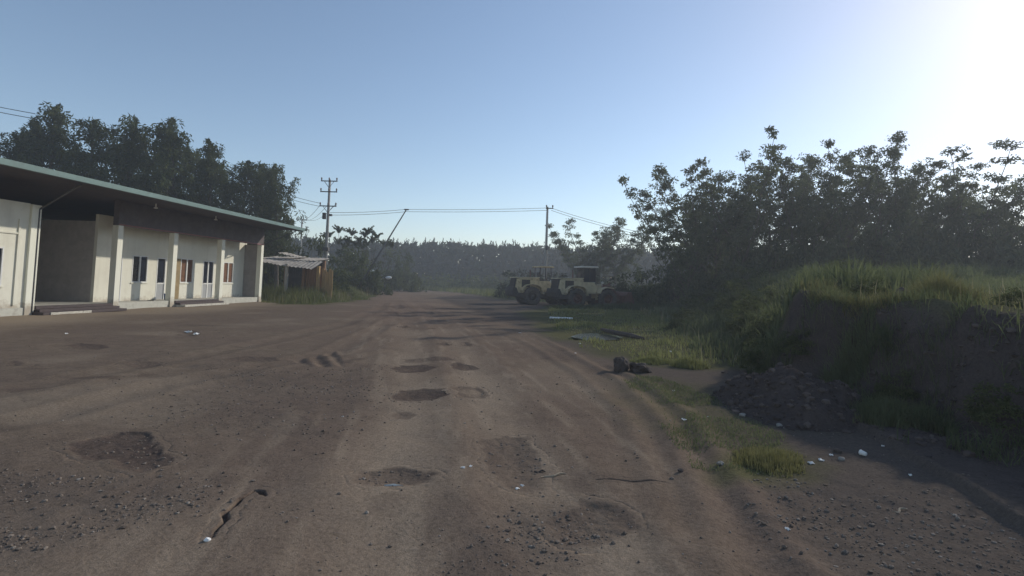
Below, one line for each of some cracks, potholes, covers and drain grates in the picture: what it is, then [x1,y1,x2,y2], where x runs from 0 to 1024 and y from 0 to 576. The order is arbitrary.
pothole [343,465,446,492]
pothole [384,409,421,421]
pothole [385,364,441,374]
pothole [533,492,648,554]
pothole [442,361,489,372]
pothole [49,430,187,477]
pothole [470,433,562,498]
crack [198,486,277,543]
pothole [387,387,459,403]
pothole [441,385,494,400]
